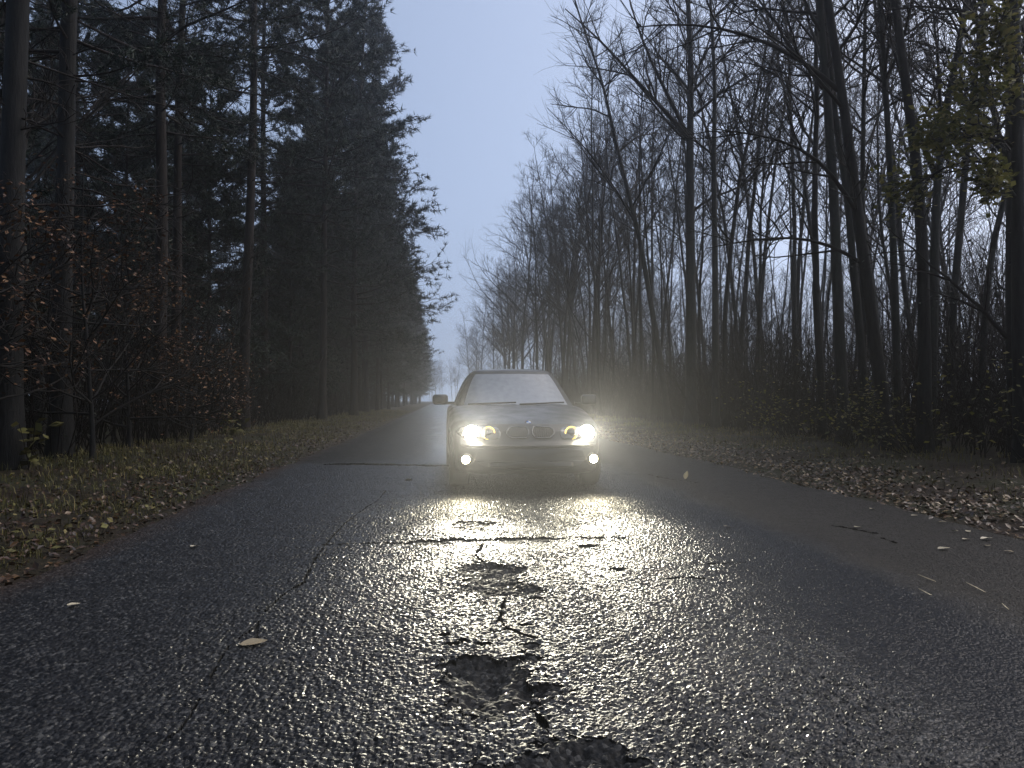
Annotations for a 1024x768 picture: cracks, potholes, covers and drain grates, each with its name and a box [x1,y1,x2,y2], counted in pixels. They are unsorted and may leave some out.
crack [831,525,897,543]
pothole [433,642,568,724]
crack [158,490,626,747]
pothole [453,560,546,600]
pothole [462,734,655,768]
